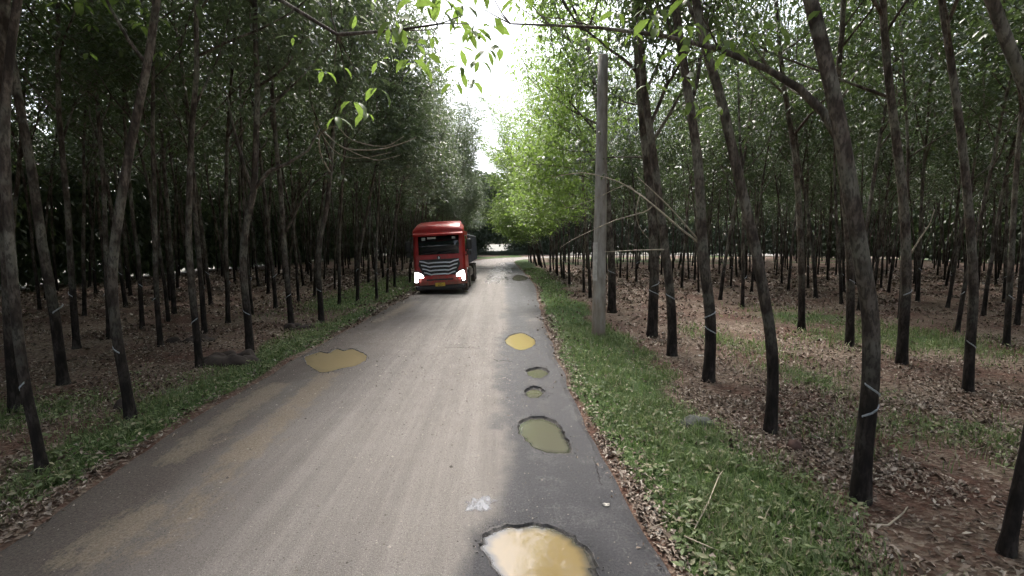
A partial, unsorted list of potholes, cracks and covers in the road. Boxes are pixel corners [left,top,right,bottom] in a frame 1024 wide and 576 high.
pothole [511,414,576,458]
pothole [501,332,538,350]
pothole [522,384,553,400]
pothole [523,366,550,380]
pothole [301,348,368,374]
pothole [473,516,604,576]
